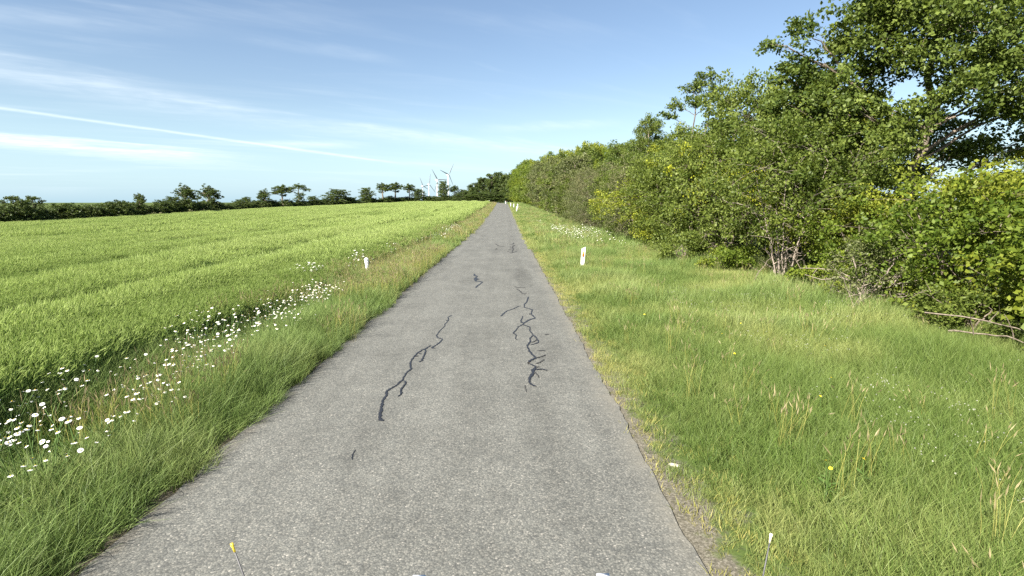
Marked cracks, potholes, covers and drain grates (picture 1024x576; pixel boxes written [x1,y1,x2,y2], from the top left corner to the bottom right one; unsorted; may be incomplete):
crack [501,287,548,392]
crack [378,315,452,421]
